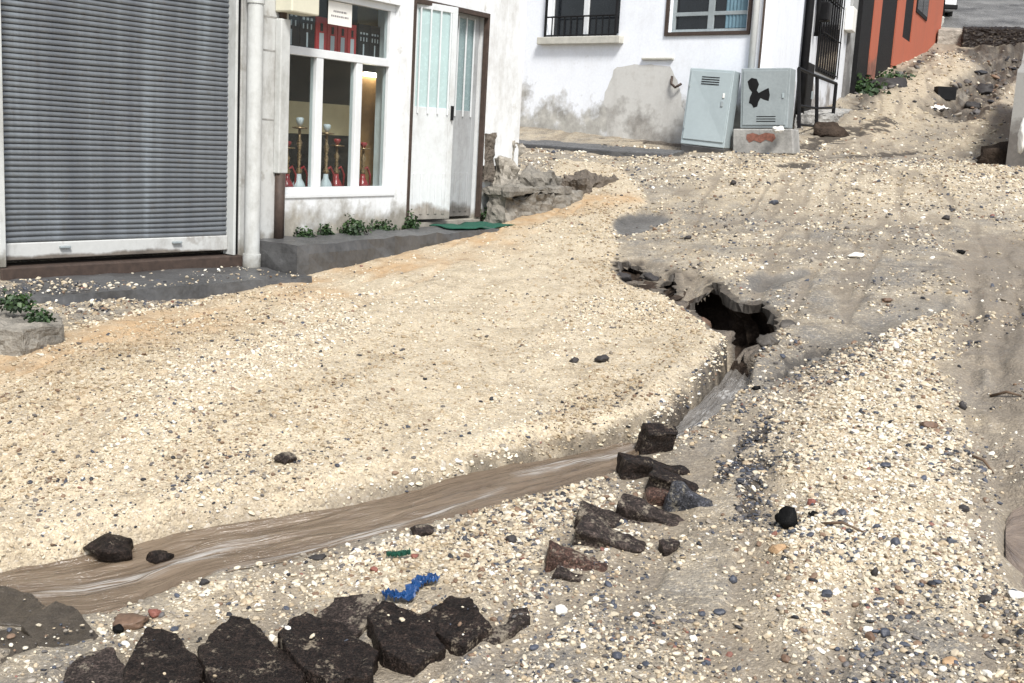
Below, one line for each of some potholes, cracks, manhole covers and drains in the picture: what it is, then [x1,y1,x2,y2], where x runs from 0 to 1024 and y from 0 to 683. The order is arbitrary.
pothole [638,273,688,301]
pothole [607,261,658,290]
pothole [686,281,788,377]
